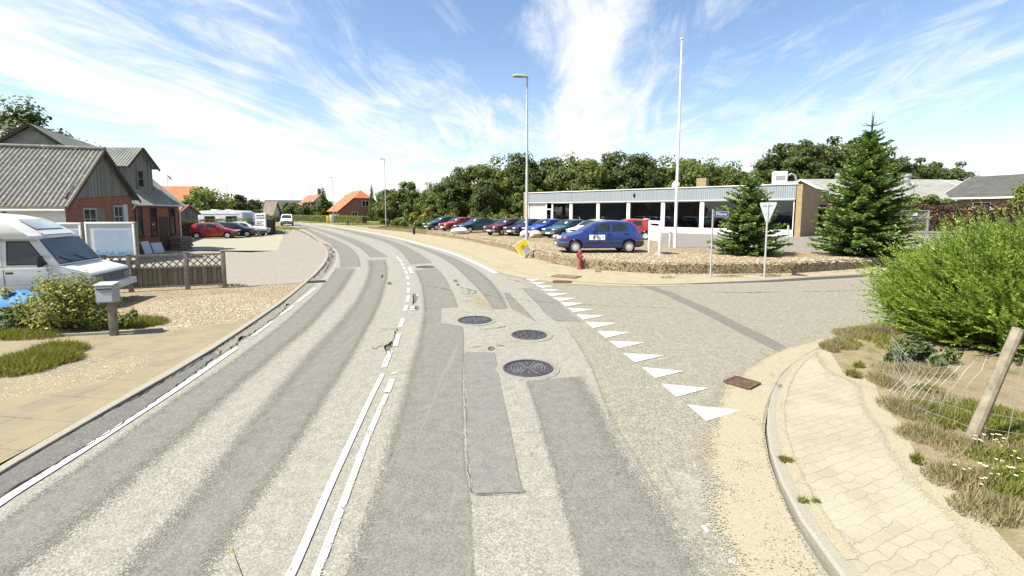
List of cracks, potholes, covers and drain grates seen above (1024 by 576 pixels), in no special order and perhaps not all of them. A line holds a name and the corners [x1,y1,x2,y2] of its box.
manhole cover [496,358,560,381]
manhole cover [453,316,496,326]
drain grate [723,375,761,390]
manhole cover [504,329,554,343]
